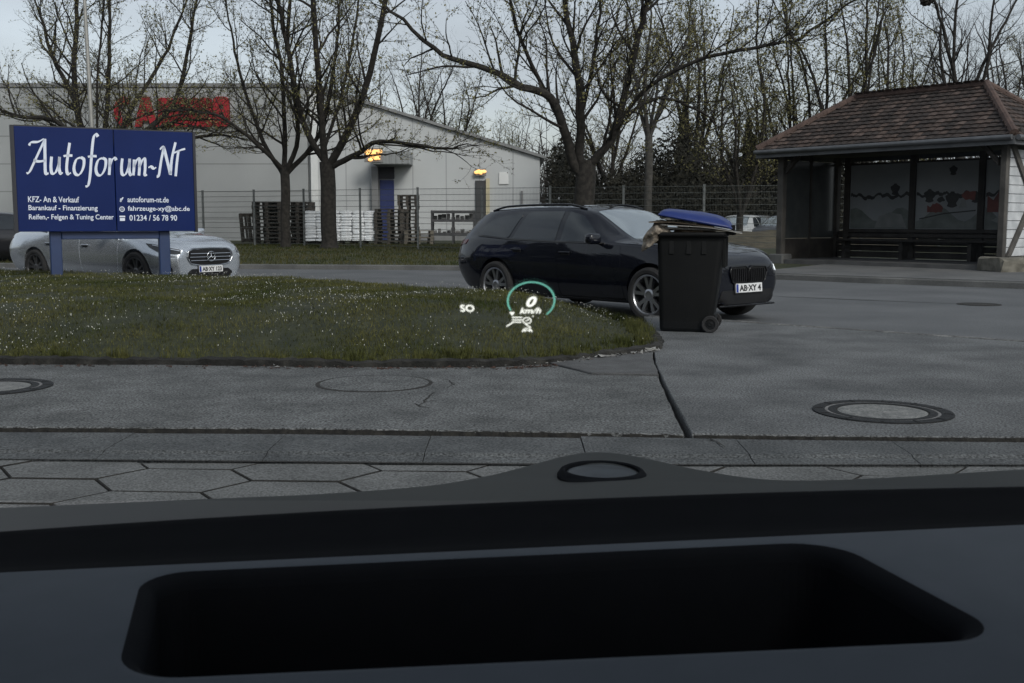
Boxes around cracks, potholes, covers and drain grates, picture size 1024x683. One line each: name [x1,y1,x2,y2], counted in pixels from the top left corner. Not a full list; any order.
manhole cover [812,400,955,424]
manhole cover [0,378,54,395]
manhole cover [315,375,433,392]
